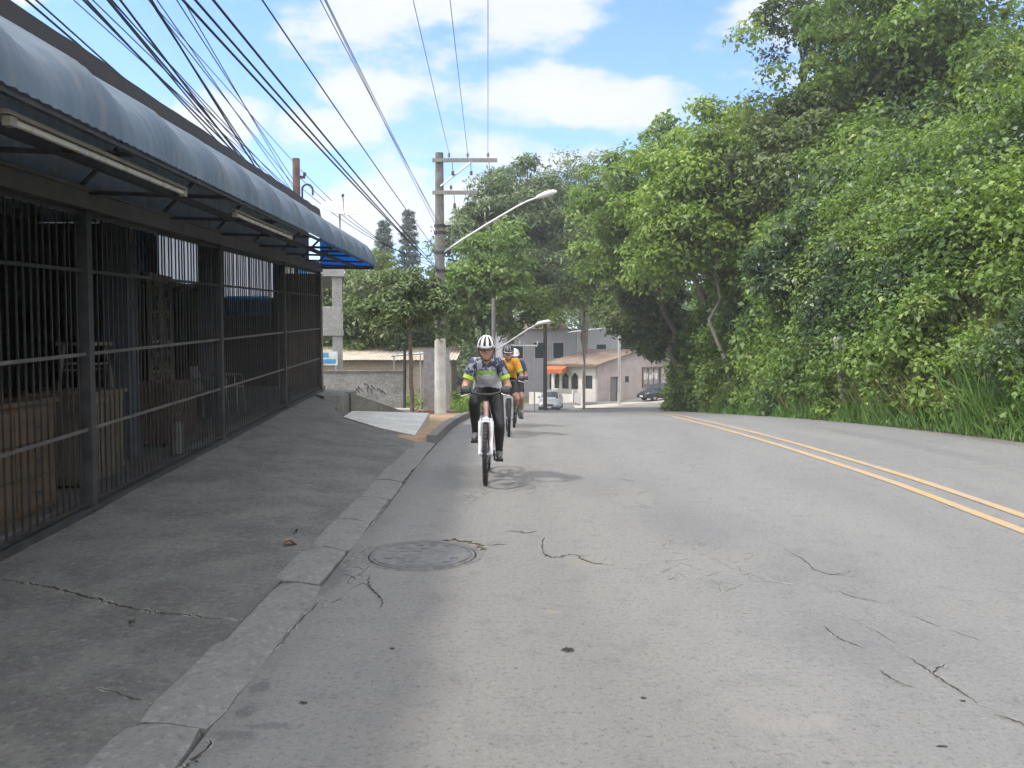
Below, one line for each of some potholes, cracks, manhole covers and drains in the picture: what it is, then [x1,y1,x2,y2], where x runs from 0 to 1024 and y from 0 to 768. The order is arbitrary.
crack [270,546,386,655]
crack [784,549,883,602]
crack [486,530,613,565]
crack [96,687,152,704]
crack [655,539,794,595]
crack [826,613,1024,726]
crack [0,578,237,621]
manhole cover [361,540,483,572]
